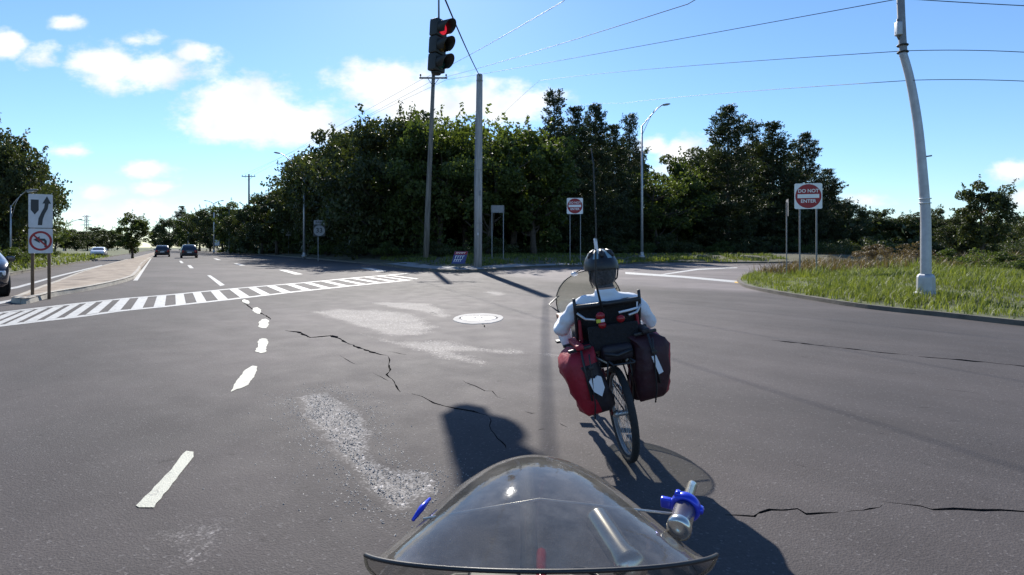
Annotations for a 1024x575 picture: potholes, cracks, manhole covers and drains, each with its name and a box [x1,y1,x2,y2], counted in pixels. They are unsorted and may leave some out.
manhole cover [453,313,503,324]
crack [733,502,1024,517]
crack [290,331,506,447]
